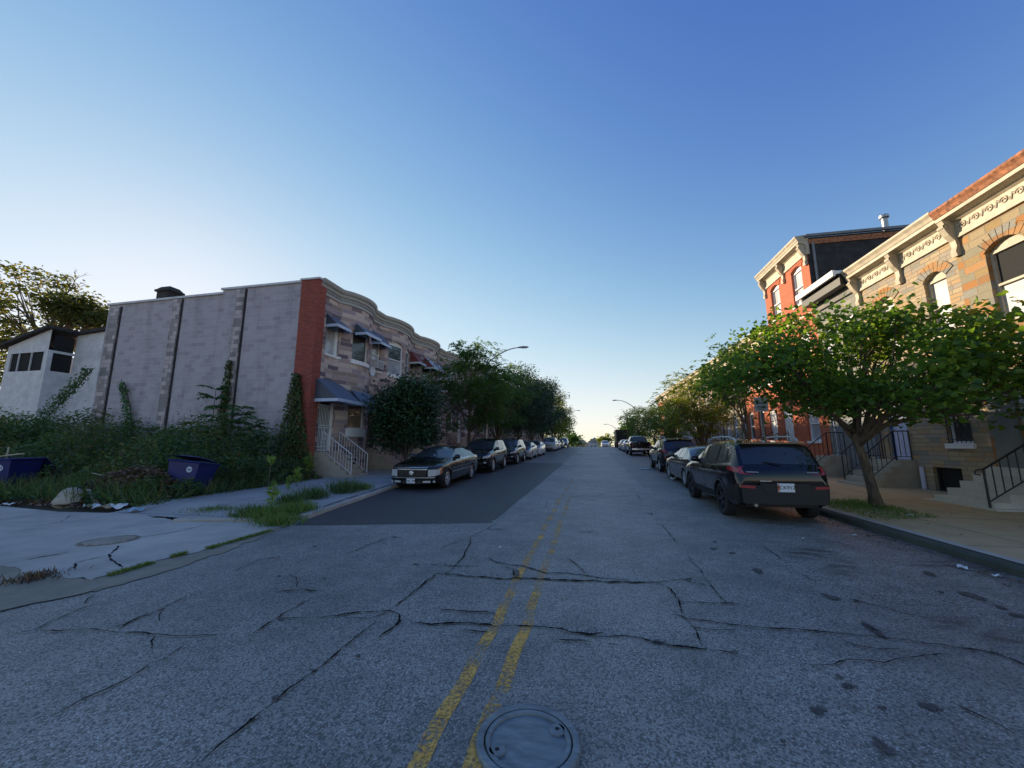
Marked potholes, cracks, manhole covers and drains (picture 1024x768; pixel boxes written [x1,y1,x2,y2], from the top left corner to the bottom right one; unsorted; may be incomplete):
manhole cover [476,704,581,768]
manhole cover [75,535,141,547]
crack [200,495,1024,762]
crack [6,593,216,723]
crack [27,546,124,569]
